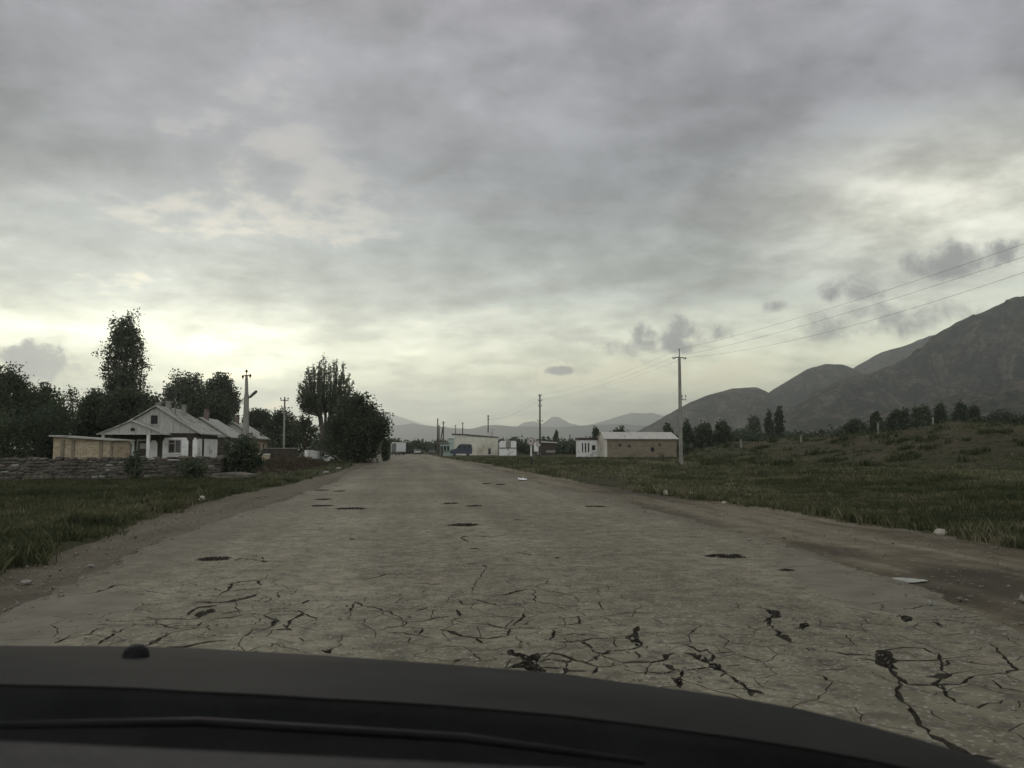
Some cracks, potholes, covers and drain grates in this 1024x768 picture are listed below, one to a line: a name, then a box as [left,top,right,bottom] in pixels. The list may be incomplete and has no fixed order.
crack [0,519,1024,760]
